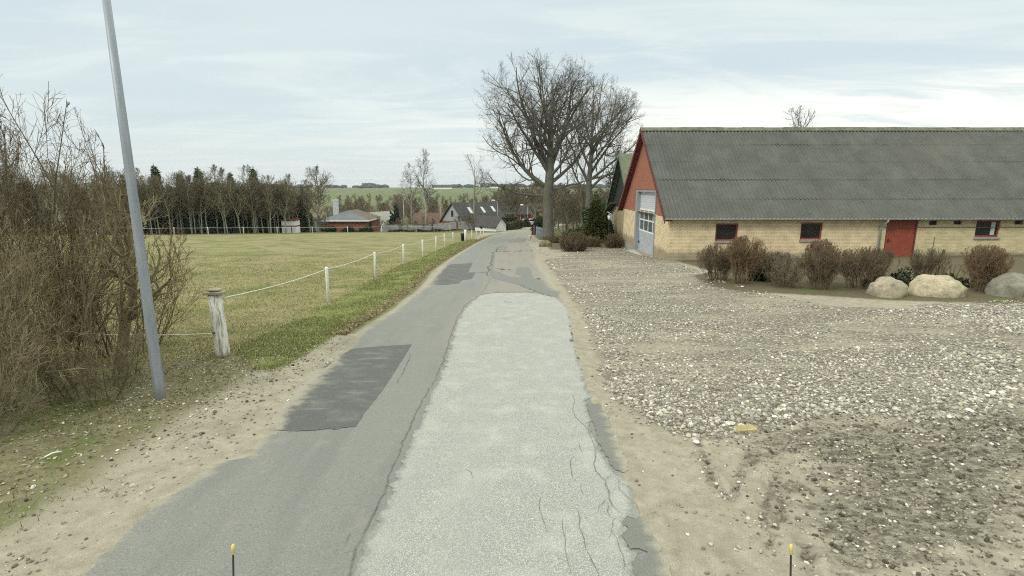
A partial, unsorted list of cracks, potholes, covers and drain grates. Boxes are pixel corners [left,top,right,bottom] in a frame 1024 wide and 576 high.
crack [539,395,639,576]
